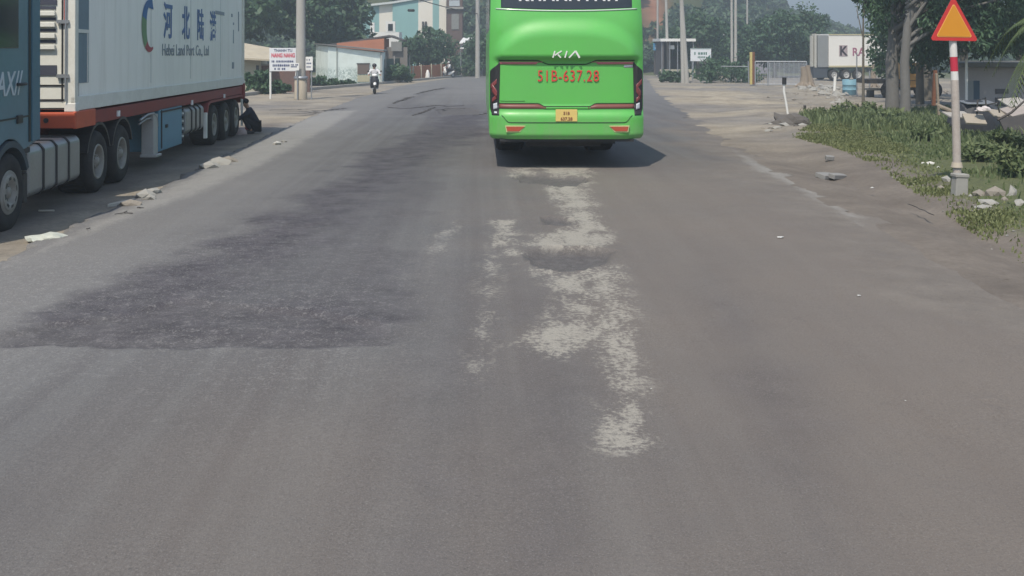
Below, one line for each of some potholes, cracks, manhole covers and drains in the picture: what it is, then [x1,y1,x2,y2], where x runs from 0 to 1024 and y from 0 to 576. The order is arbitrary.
pothole [536,215,578,226]
pothole [516,244,622,272]
pothole [510,171,596,188]
